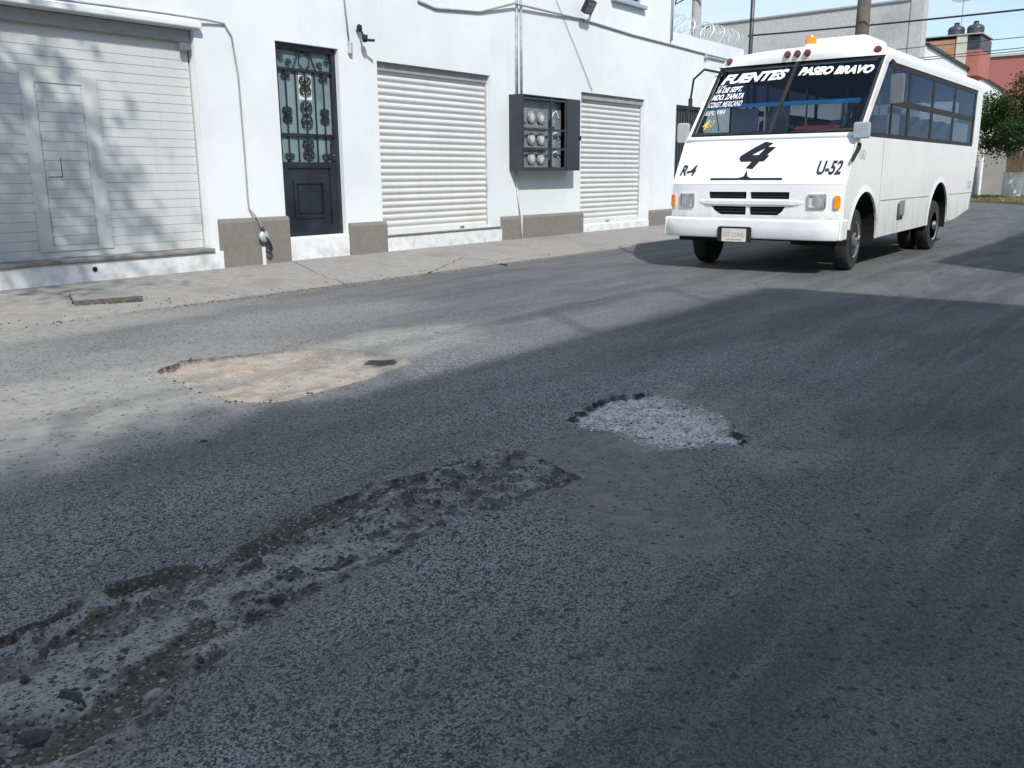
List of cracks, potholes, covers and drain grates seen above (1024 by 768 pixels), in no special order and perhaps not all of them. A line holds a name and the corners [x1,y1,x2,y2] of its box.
pothole [157,348,412,403]
pothole [566,393,748,450]
pothole [0,448,583,768]
utility cover [69,290,143,306]
